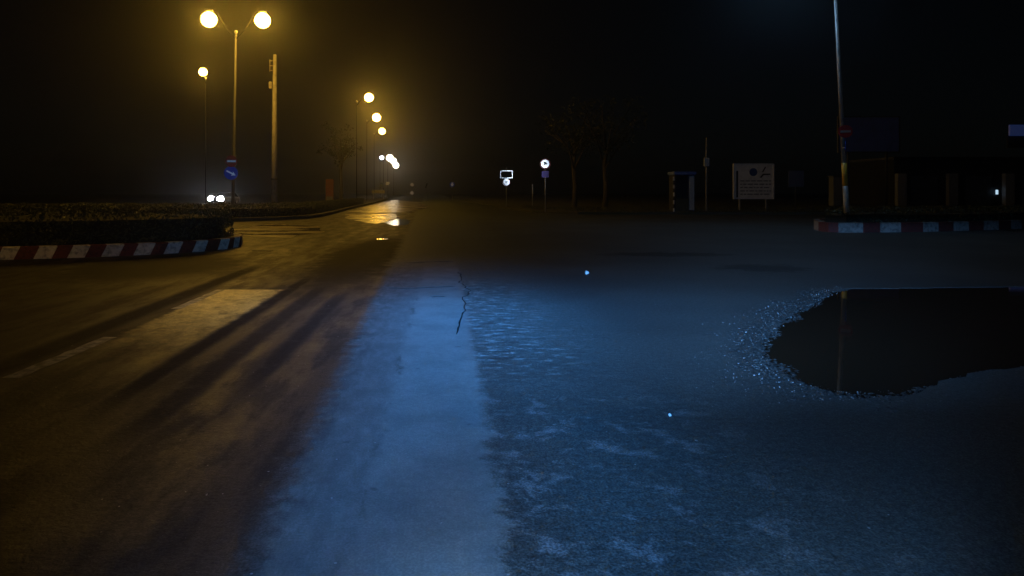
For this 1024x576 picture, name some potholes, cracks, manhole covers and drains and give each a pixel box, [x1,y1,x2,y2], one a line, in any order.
pothole [699,286,1024,413]
crack [399,261,472,334]
